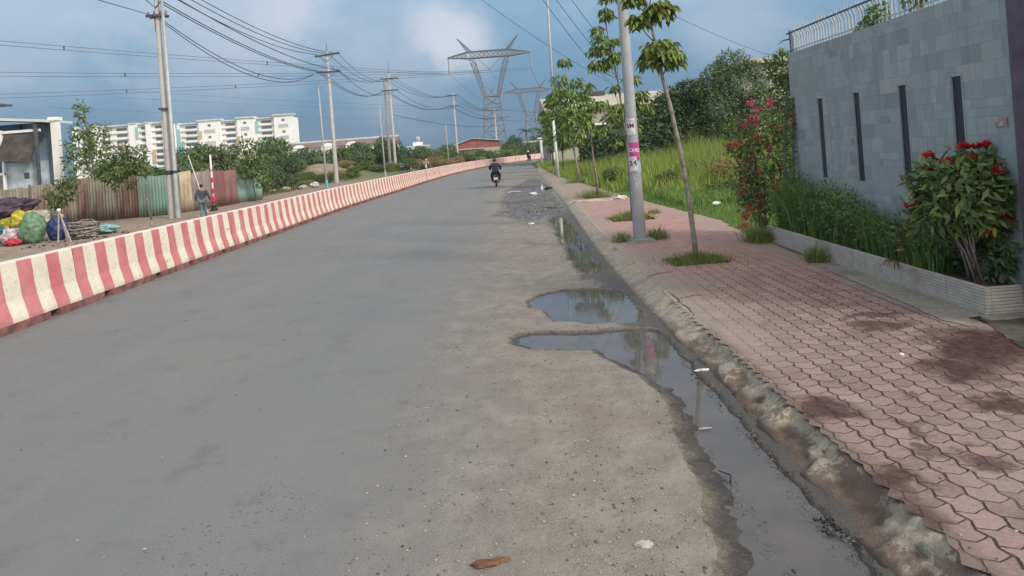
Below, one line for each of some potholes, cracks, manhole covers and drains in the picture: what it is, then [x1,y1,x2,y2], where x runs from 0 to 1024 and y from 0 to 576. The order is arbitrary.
pothole [507,326,886,576]
pothole [547,214,613,275]
pothole [524,287,647,323]
pothole [488,179,569,221]
